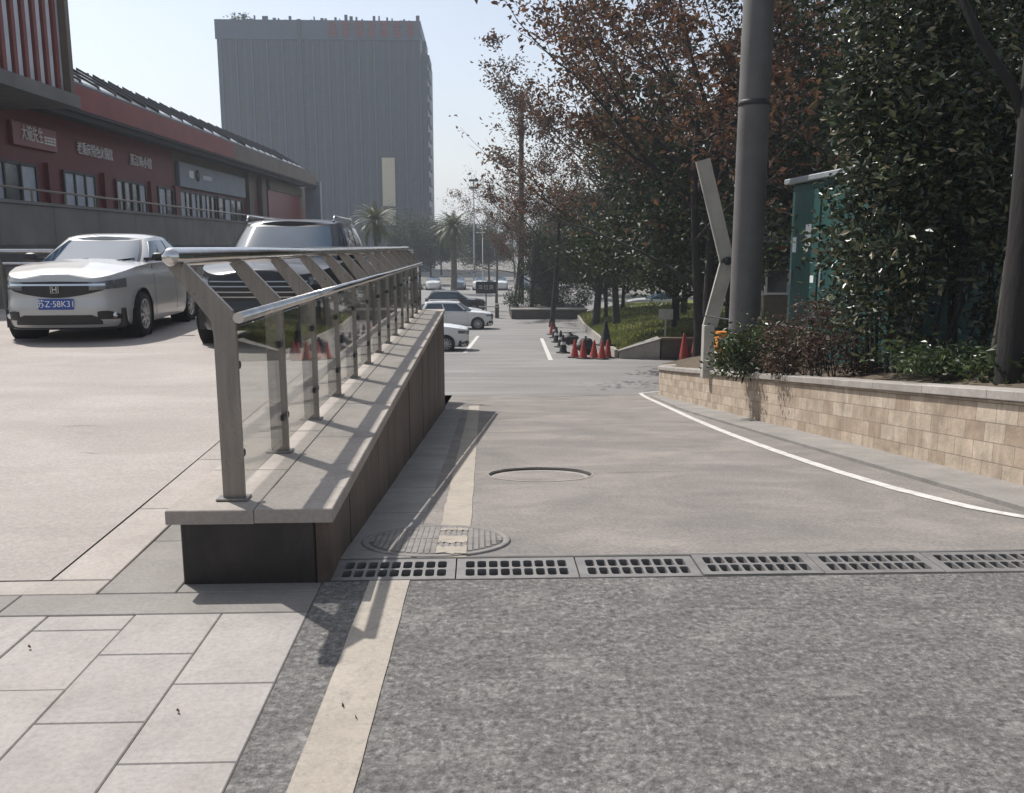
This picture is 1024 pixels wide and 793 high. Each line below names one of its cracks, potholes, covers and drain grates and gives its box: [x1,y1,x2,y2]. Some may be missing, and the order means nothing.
manhole cover [488,468,593,482]
drain grate [575,556,703,577]
drain grate [331,559,456,581]
manhole cover [361,525,510,558]
drain grate [920,551,1024,572]
drain grate [456,557,579,579]
drain grate [806,552,946,574]
drain grate [691,553,825,576]
